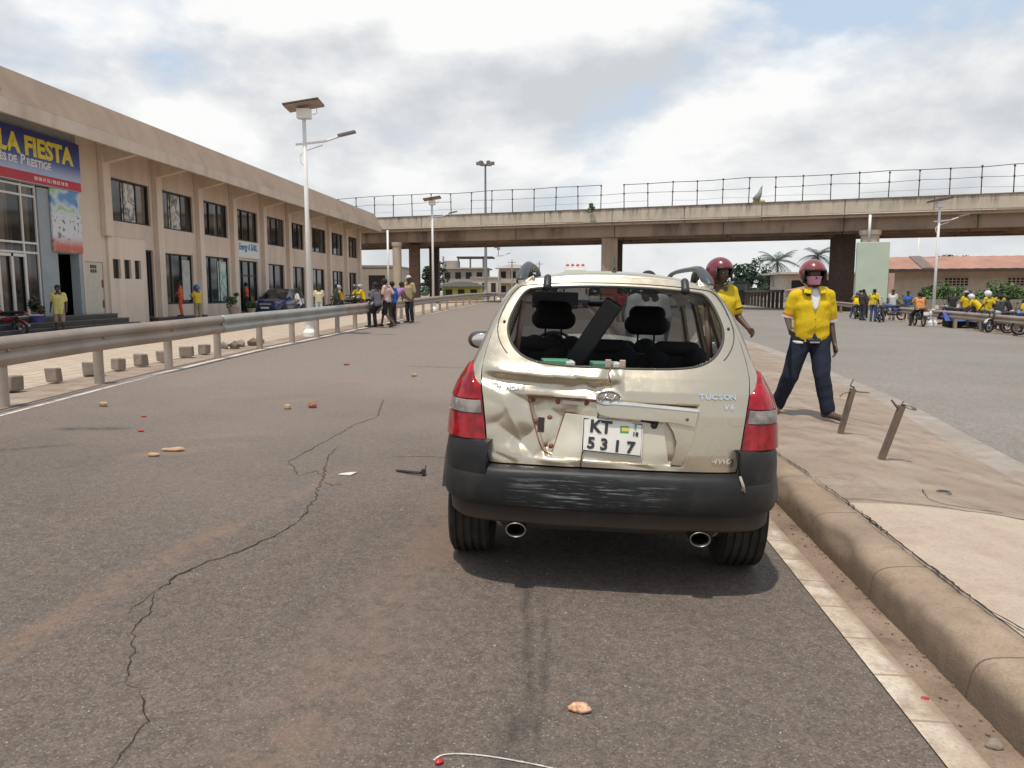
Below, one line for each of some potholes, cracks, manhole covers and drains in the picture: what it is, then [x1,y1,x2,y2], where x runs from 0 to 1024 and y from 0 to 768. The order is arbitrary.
crack [112,400,384,768]
